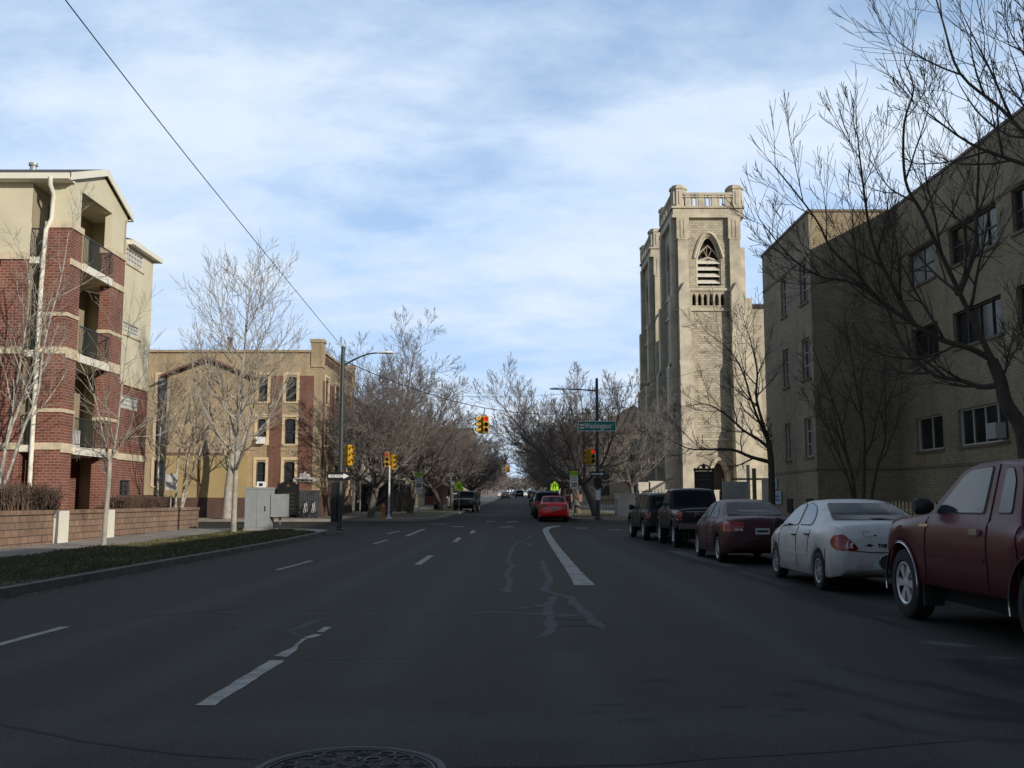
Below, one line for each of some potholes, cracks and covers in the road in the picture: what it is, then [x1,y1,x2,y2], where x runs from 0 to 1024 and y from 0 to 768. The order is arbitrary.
manhole cover [255,746,446,768]
